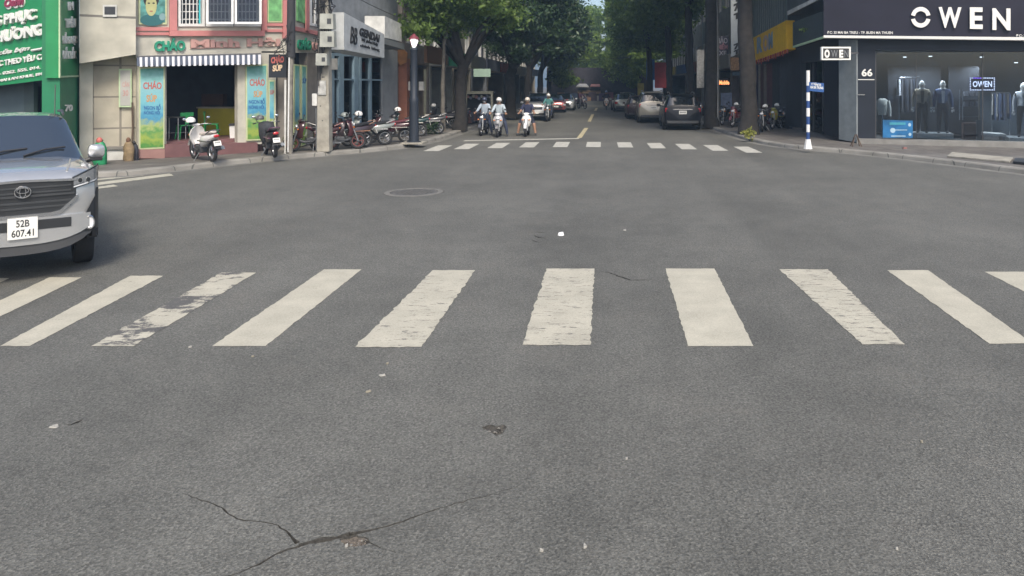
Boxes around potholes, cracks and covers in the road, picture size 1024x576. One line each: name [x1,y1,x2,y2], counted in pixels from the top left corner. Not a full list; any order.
pothole [482,425,507,436]
manhole cover [384,188,444,197]
crack [183,485,519,576]
